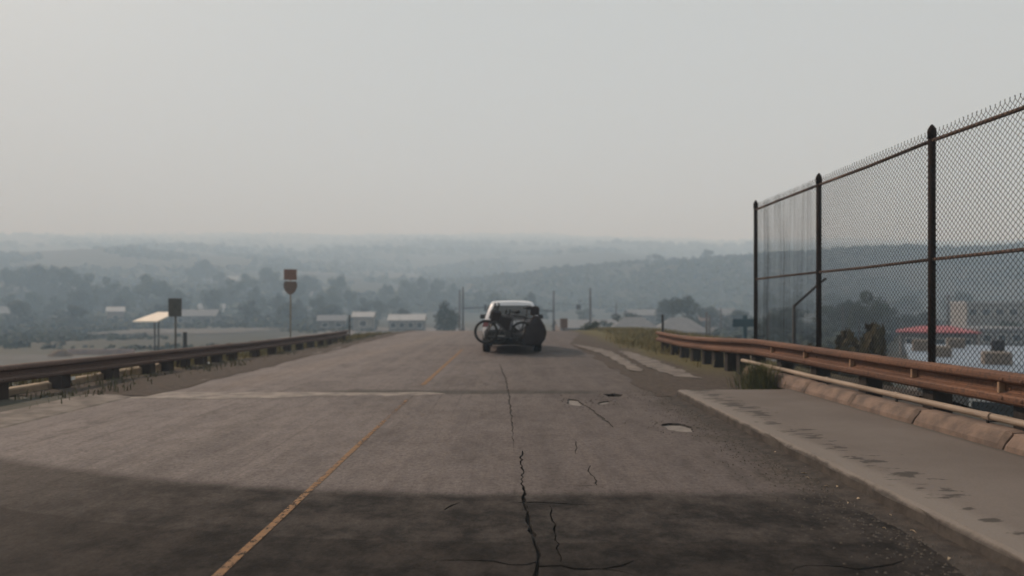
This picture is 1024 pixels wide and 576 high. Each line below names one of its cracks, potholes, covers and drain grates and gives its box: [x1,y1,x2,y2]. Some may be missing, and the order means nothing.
crack [434,365,634,576]
pothole [661,423,694,432]
